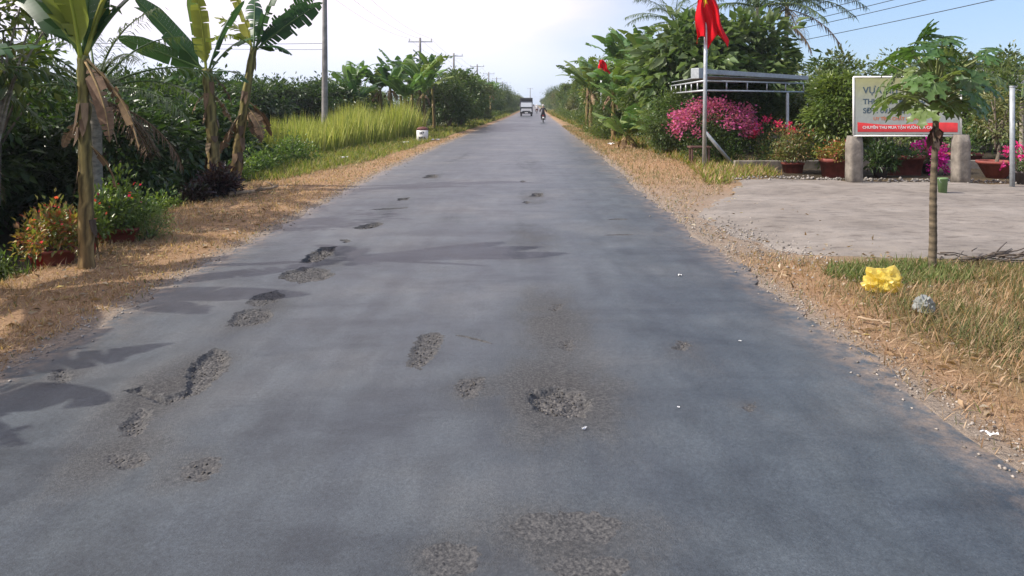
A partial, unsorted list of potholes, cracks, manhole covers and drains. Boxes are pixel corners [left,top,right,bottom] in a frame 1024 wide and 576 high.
pothole [354,222,384,230]
pothole [453,376,486,400]
pothole [245,290,285,307]
pothole [47,369,75,385]
pothole [122,348,233,405]
pothole [521,386,594,420]
pothole [98,451,151,470]
pothole [181,457,223,483]
pothole [300,246,337,263]
pothole [116,407,154,439]
pothole [225,309,274,327]
pothole [278,267,336,284]
